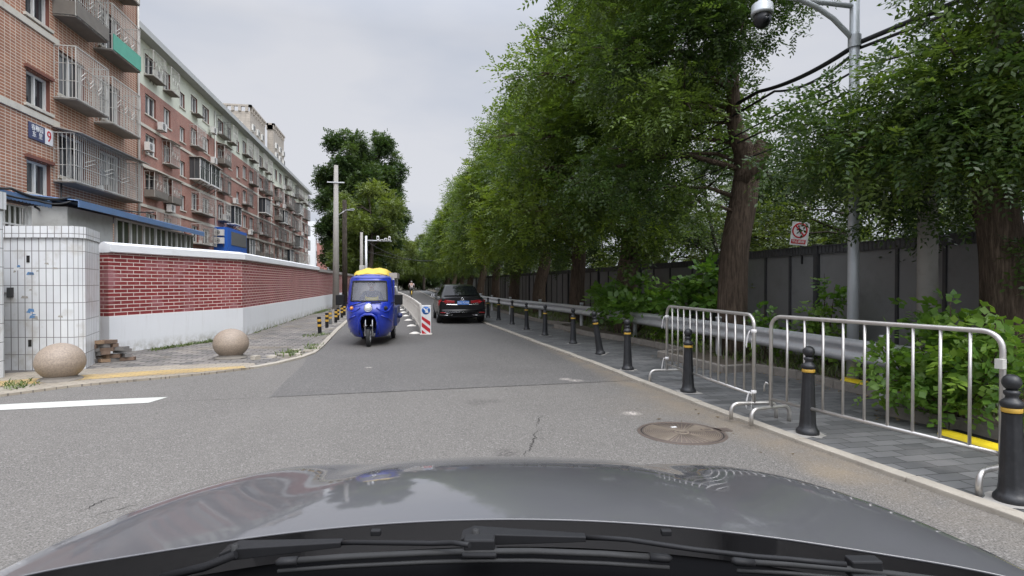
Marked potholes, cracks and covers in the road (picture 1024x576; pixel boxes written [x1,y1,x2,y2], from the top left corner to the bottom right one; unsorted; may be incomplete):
manhole cover [637,422,732,445]
